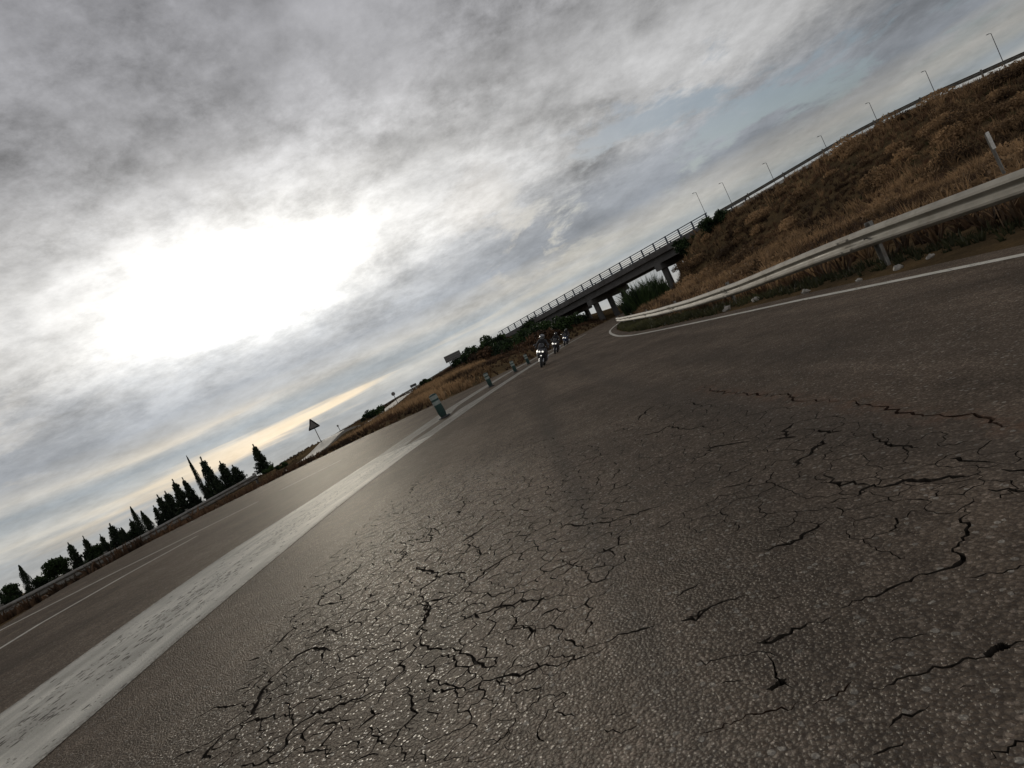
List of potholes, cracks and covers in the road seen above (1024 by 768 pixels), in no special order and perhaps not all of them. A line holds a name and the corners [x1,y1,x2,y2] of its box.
crack [990,740,1024,760]
crack [174,434,656,767]
crack [610,387,1024,734]
crack [869,634,1024,755]
